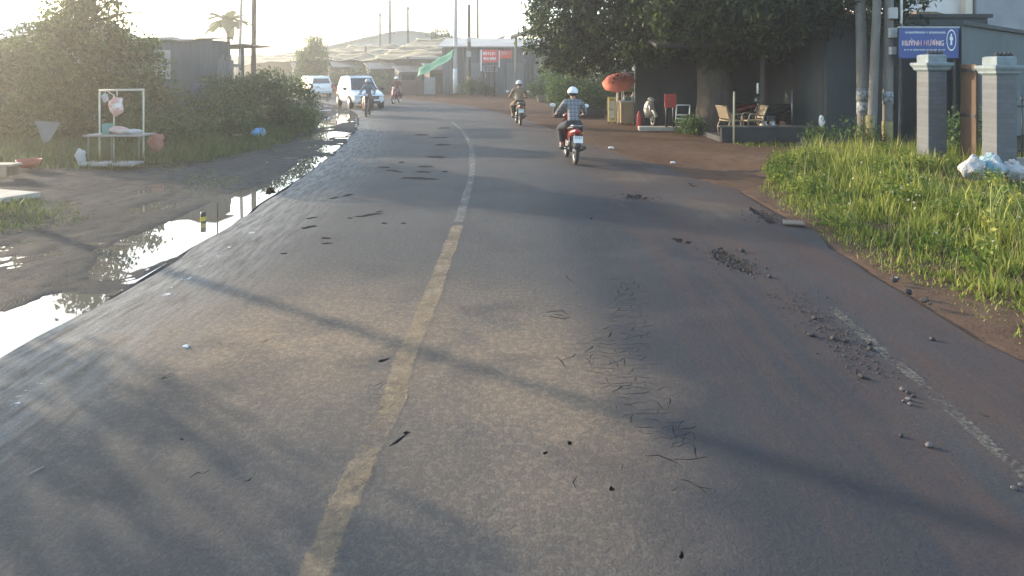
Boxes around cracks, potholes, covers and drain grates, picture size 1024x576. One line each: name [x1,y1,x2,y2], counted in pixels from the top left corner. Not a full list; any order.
pothole [749,207,779,224]
crack [556,282,712,497]
pothole [711,247,755,274]
